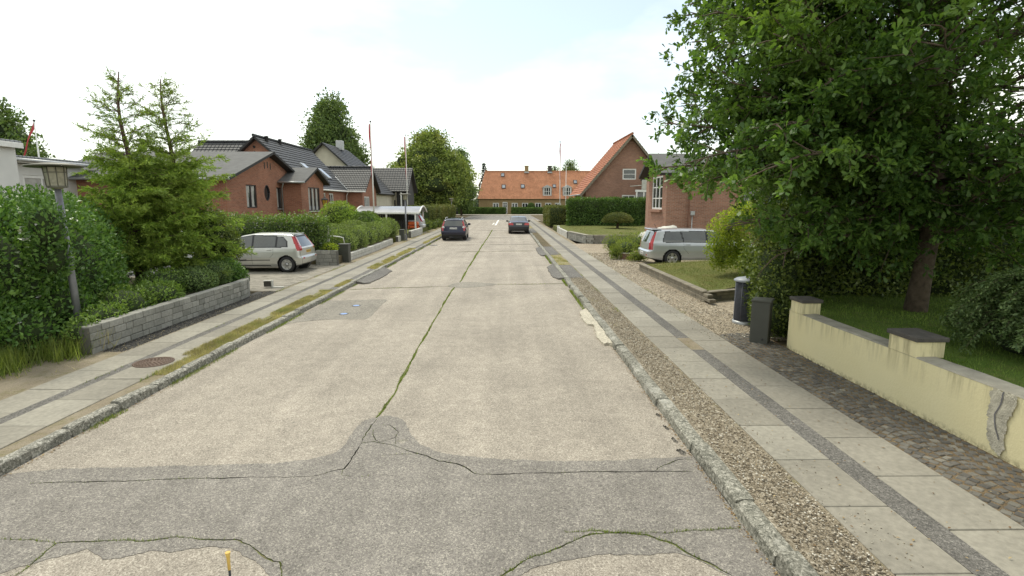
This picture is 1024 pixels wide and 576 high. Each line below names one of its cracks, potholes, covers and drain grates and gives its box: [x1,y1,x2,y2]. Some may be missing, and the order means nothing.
manhole cover [132,357,175,368]
crack [501,525,741,576]
crack [4,535,283,576]
crack [30,230,681,483]
